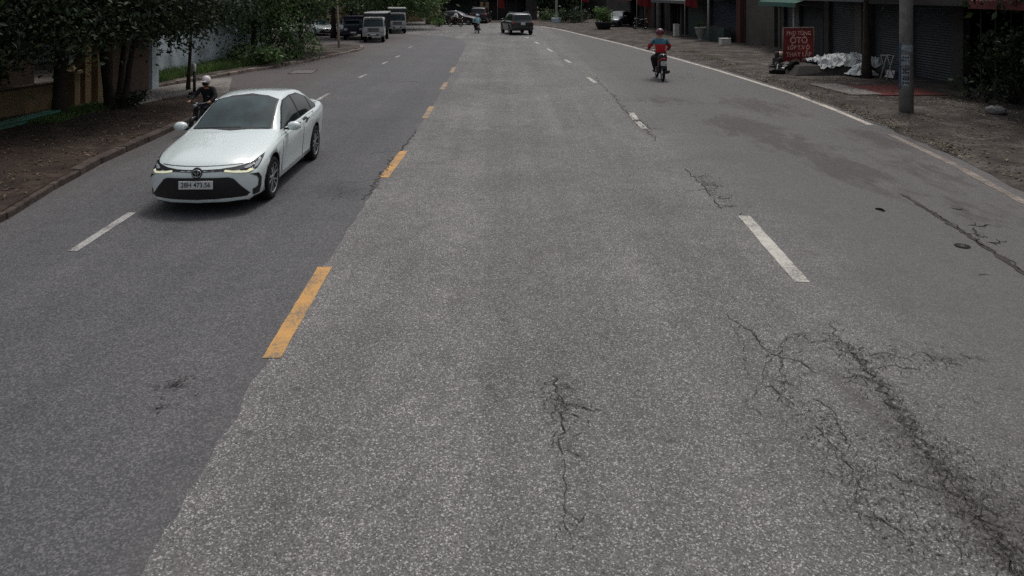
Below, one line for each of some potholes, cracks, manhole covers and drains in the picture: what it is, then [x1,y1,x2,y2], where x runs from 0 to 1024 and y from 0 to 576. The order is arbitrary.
crack [795,320,1024,576]
crack [685,169,741,214]
crack [150,375,204,414]
crack [589,74,660,140]
crack [950,207,1007,245]
crack [531,366,604,549]
